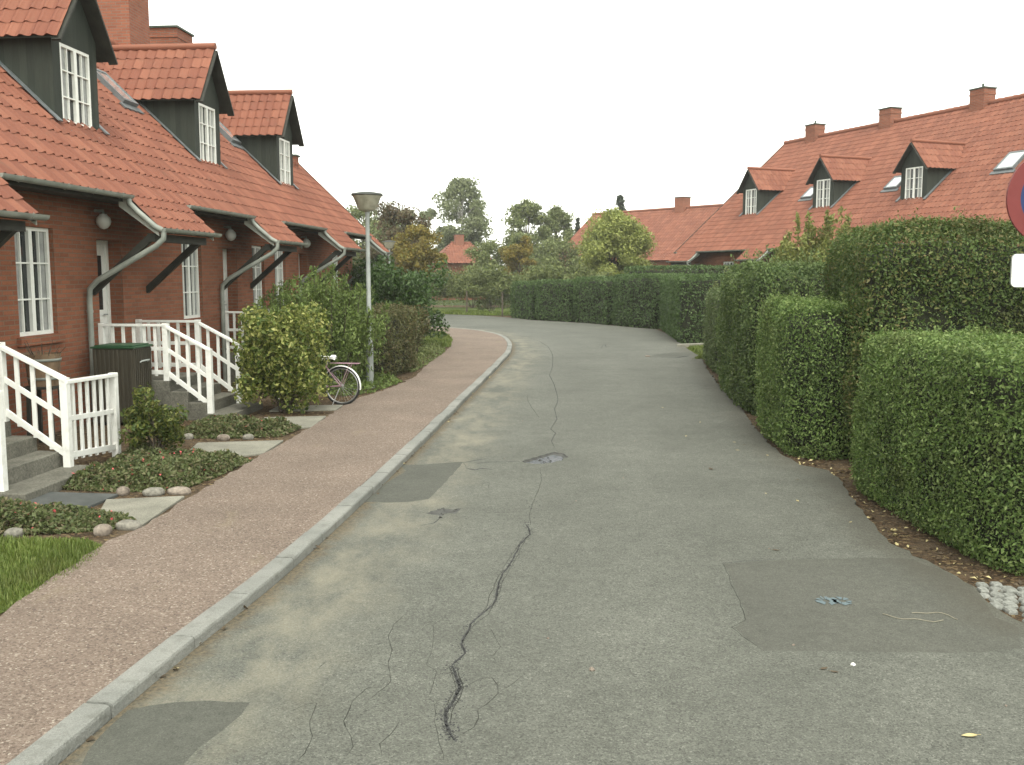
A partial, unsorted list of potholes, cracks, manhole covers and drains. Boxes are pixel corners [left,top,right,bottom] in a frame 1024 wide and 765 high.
crack [421,472,542,760]
crack [343,610,409,755]
pothole [522,452,568,464]
pothole [427,508,461,518]
crack [527,342,558,446]
